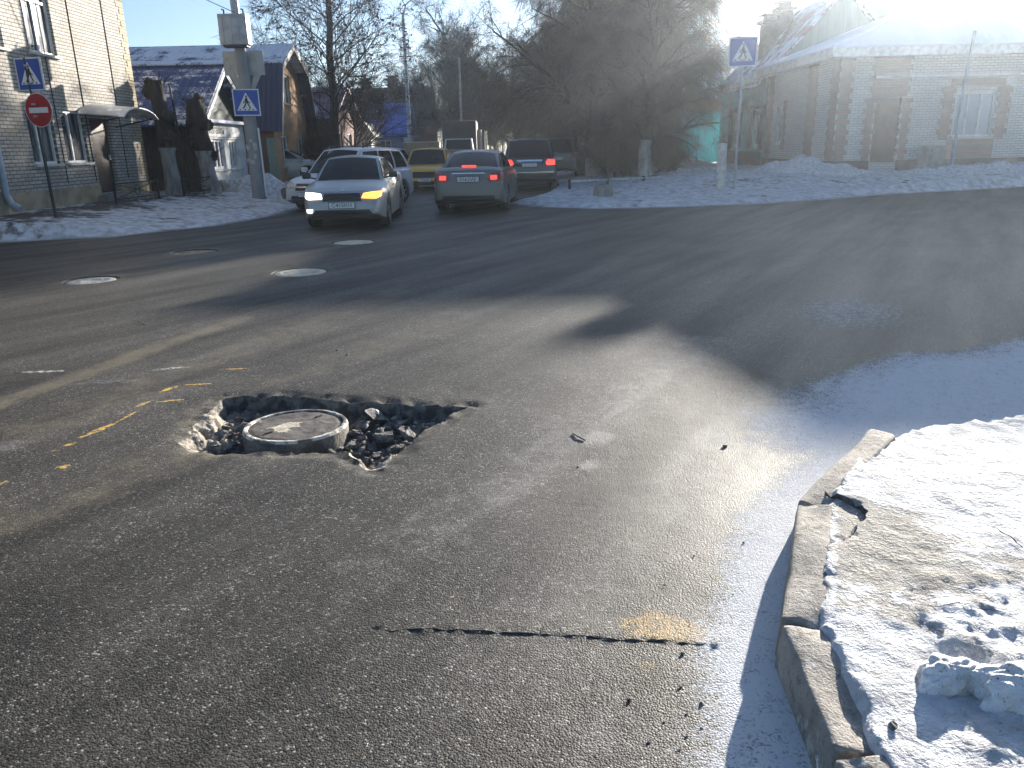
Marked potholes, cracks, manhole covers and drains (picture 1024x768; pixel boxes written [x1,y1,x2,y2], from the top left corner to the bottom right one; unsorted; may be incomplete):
manhole cover [61,276,121,285]
manhole cover [271,267,330,277]
manhole cover [242,409,349,455]
pothole [178,395,467,470]
